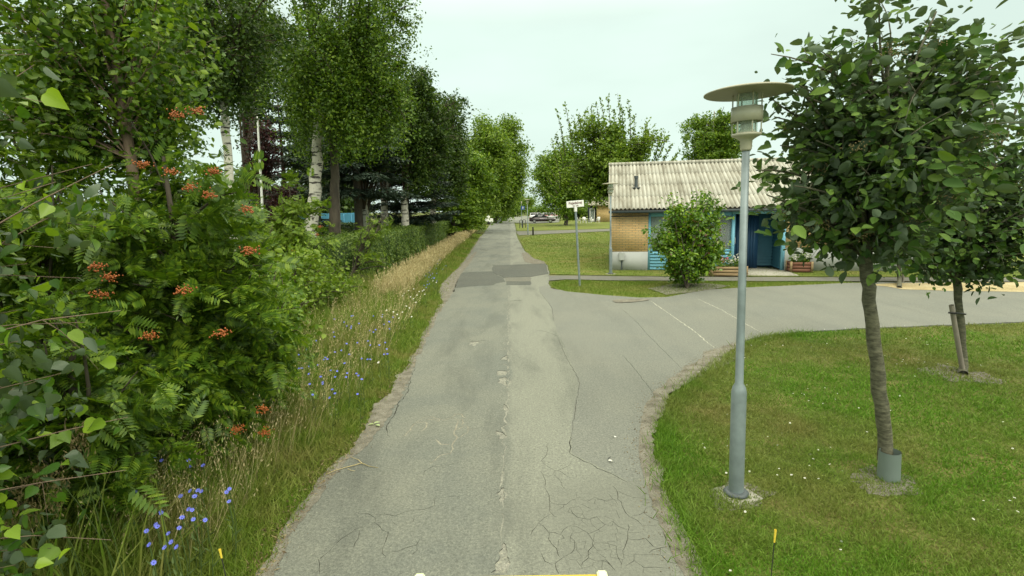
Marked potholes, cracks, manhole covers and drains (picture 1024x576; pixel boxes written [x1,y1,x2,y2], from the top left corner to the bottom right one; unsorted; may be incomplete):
crack [319,374,469,574]
